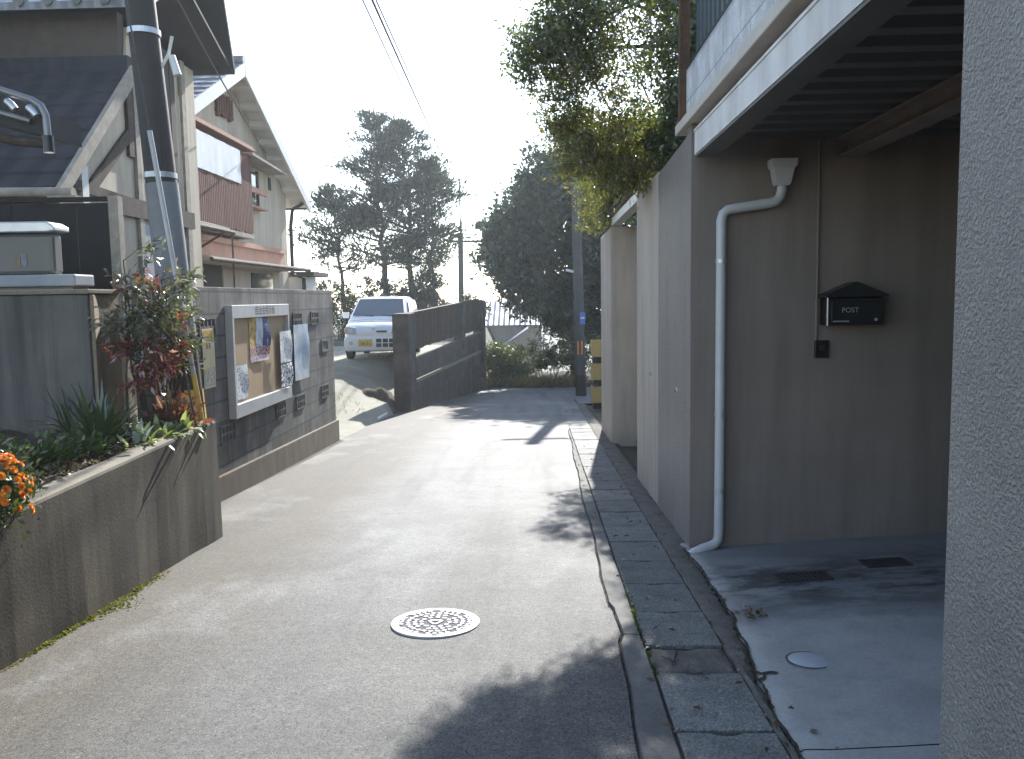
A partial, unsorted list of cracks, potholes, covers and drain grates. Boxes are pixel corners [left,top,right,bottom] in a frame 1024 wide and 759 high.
drain grate [857,557,914,568]
manhole cover [785,651,831,669]
manhole cover [391,608,480,639]
drain grate [772,570,834,583]
